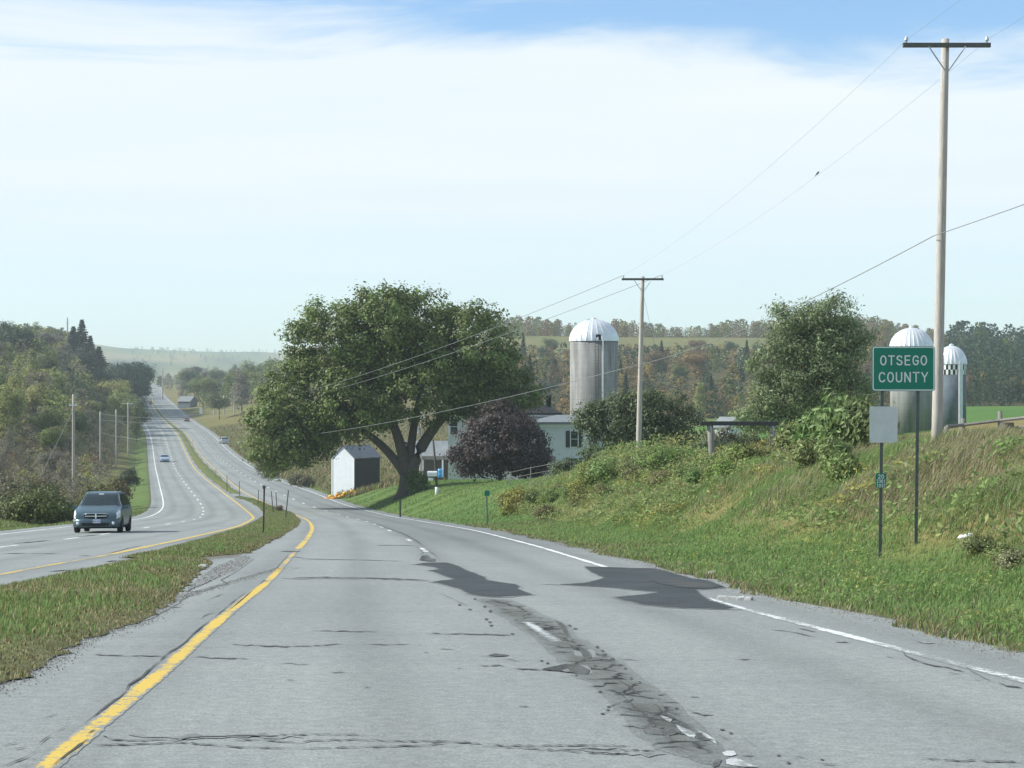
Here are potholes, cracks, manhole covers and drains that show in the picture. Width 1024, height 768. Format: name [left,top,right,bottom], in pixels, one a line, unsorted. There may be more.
crack [1,551,697,766]
crack [886,652,1021,688]
